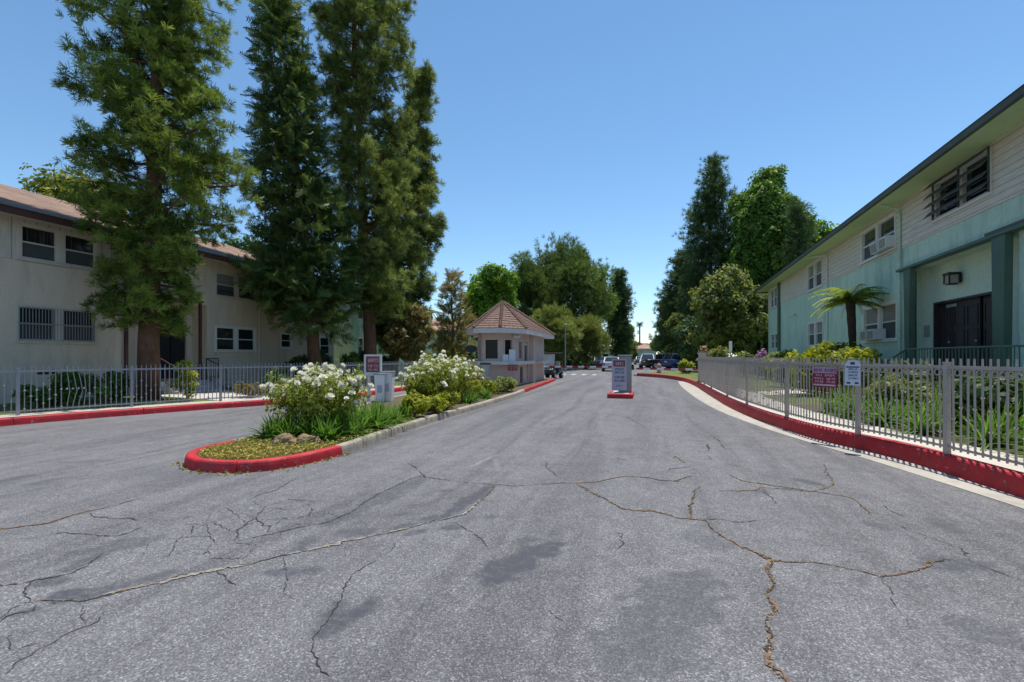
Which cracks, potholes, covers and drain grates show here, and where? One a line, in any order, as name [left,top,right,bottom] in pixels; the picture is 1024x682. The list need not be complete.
crack [0,499,160,539]
crack [143,437,955,682]
crack [7,604,101,672]
crack [727,464,1007,575]
